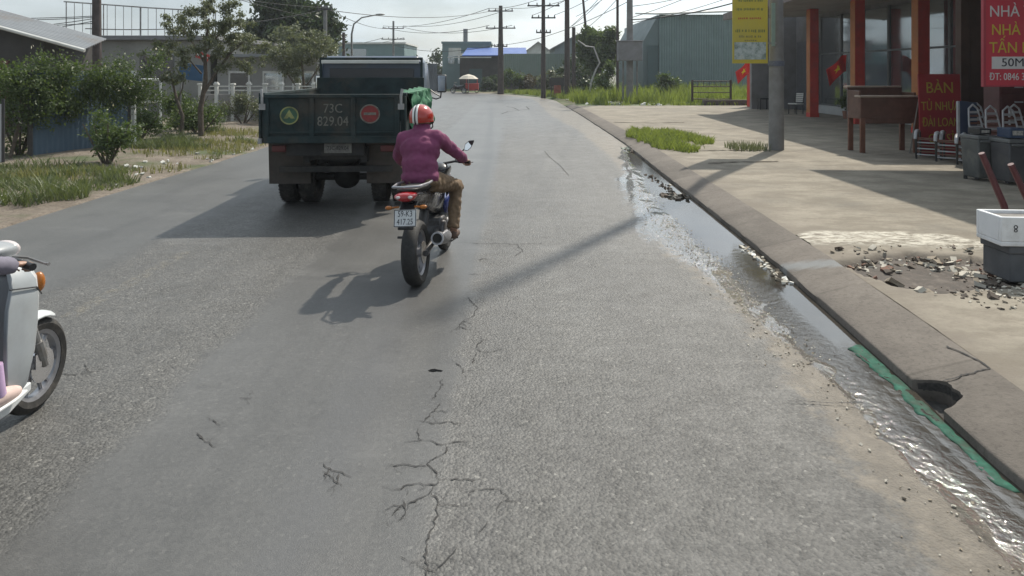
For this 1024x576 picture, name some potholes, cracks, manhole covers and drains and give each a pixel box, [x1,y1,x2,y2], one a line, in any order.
crack [321,462,349,495]
crack [450,298,499,376]
crack [385,379,518,576]
